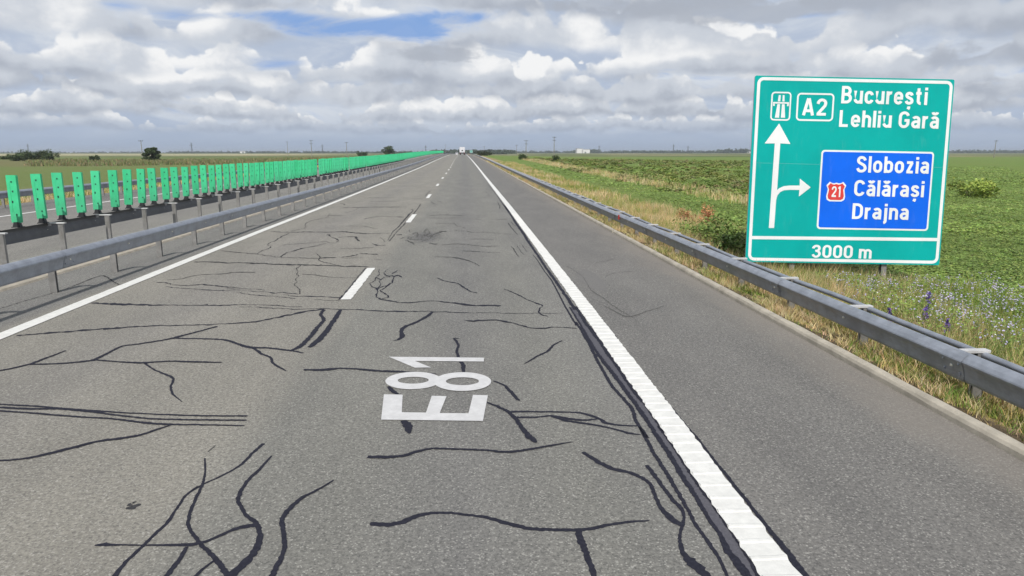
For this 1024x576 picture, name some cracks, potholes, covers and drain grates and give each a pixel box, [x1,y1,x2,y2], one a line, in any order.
crack [567,266,662,318]
crack [0,191,570,461]
crack [494,381,641,435]
